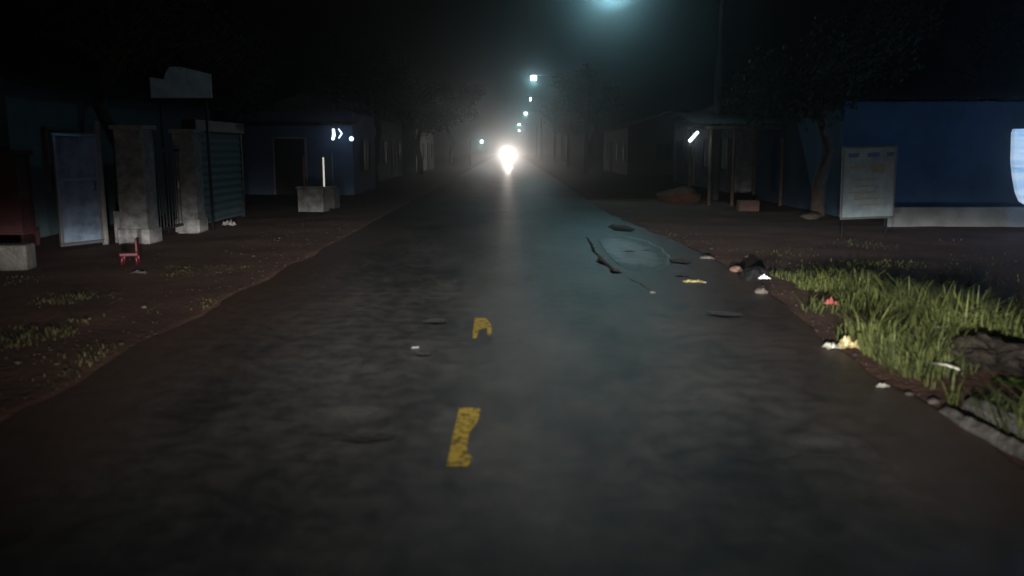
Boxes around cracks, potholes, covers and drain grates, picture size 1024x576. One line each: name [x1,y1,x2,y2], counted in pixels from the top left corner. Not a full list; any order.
pothole [607,224,636,232]
pothole [596,235,671,273]
crack [586,237,651,291]
pothole [333,432,400,444]
